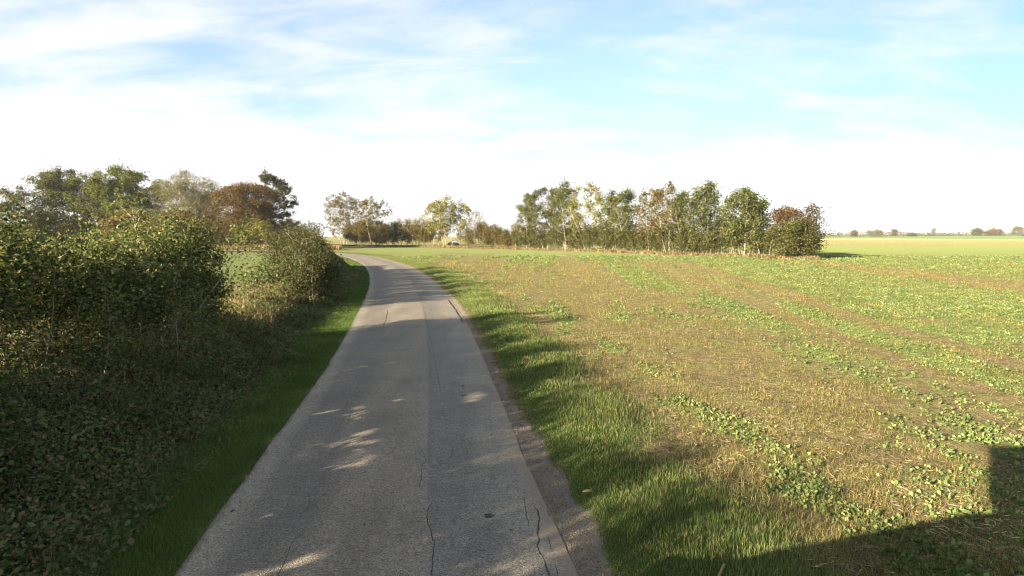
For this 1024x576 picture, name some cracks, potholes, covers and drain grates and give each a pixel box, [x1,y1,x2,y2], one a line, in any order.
crack [417,443,435,576]
crack [524,495,558,576]
